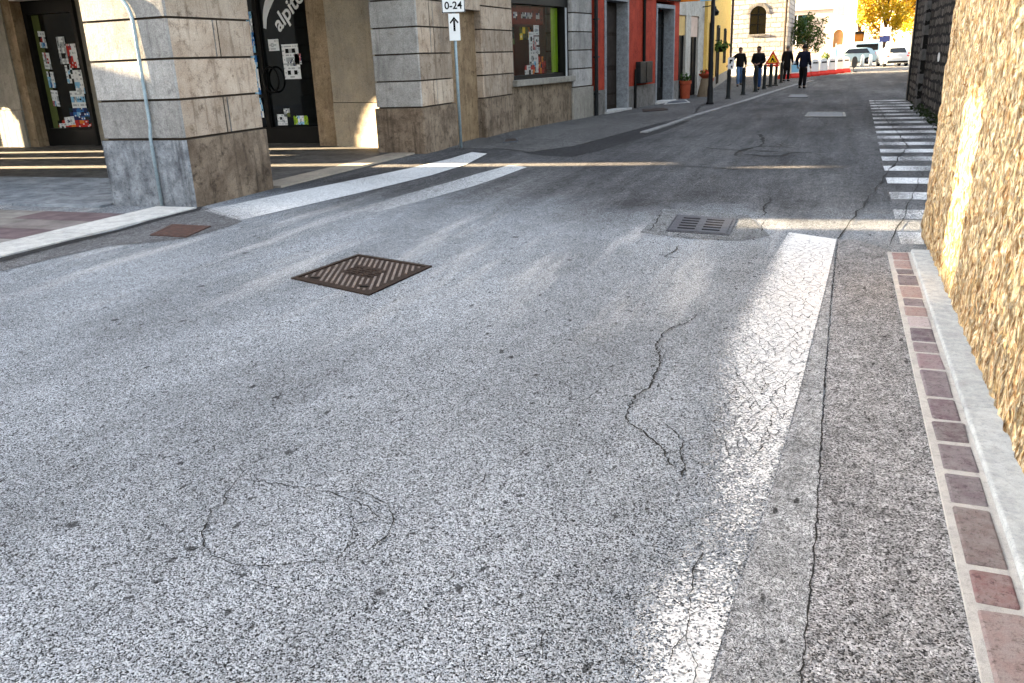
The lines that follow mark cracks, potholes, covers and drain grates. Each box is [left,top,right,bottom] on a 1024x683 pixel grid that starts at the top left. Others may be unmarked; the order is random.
crack [474,314,697,487]
manhole cover [150,224,211,238]
crack [693,133,823,170]
crack [186,471,394,589]
manhole cover [291,254,432,296]
drain grate [666,214,737,236]
crack [664,555,717,682]
